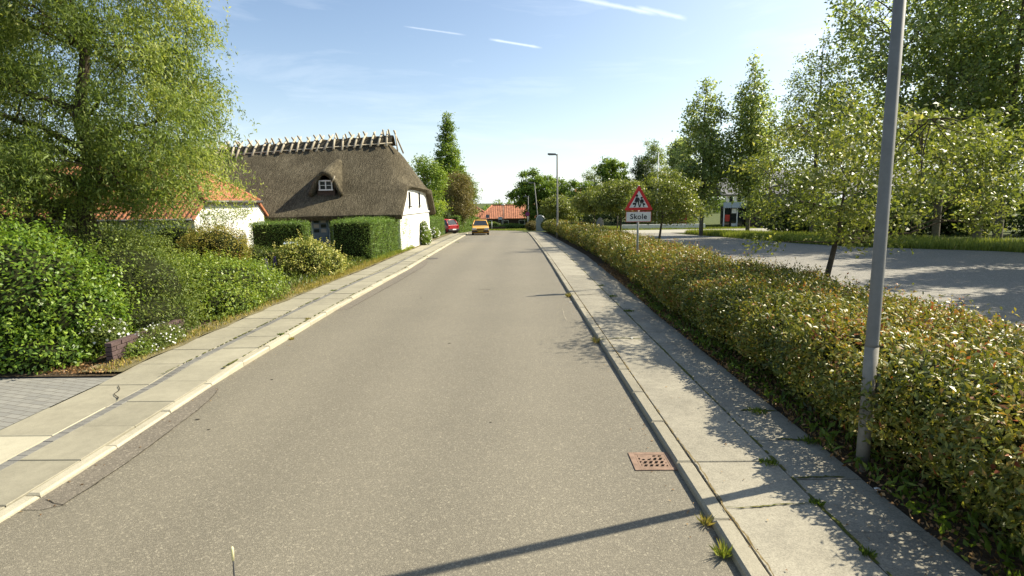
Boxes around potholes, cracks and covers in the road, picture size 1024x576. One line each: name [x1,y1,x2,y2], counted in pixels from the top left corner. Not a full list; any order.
crack [60,391,217,506]
drain grate [628,452,678,471]
